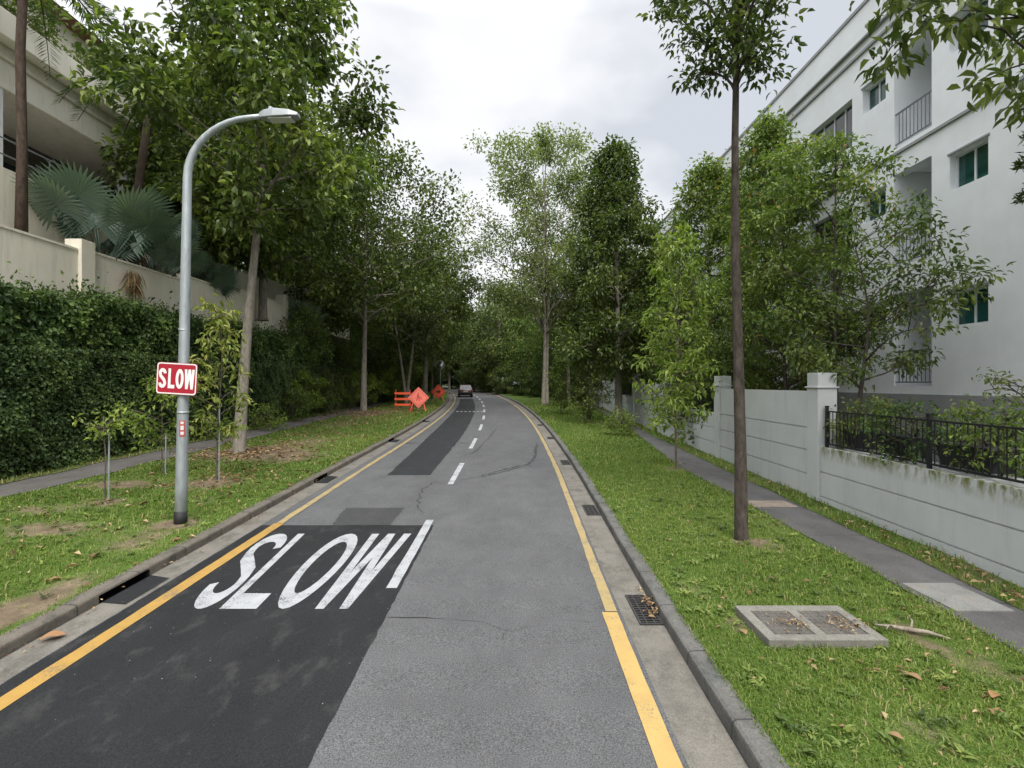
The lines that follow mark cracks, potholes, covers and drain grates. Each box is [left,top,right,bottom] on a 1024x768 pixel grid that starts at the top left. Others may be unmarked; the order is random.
manhole cover [735,605,889,649]
crack [416,443,538,514]
drain grate [625,595,664,625]
drain grate [314,473,338,483]
drain grate [582,505,600,515]
drain grate [99,569,169,604]
crack [398,617,589,638]
